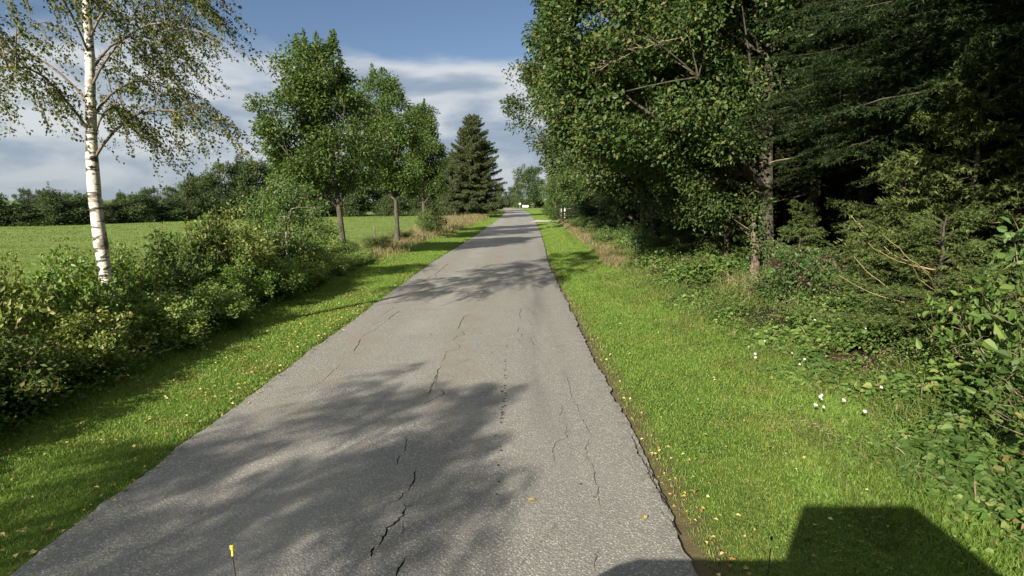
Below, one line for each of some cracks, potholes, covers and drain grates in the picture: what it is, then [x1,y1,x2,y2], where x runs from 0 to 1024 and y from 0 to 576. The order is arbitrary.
crack [552,378,603,568]
crack [424,316,468,405]
crack [370,423,416,576]
